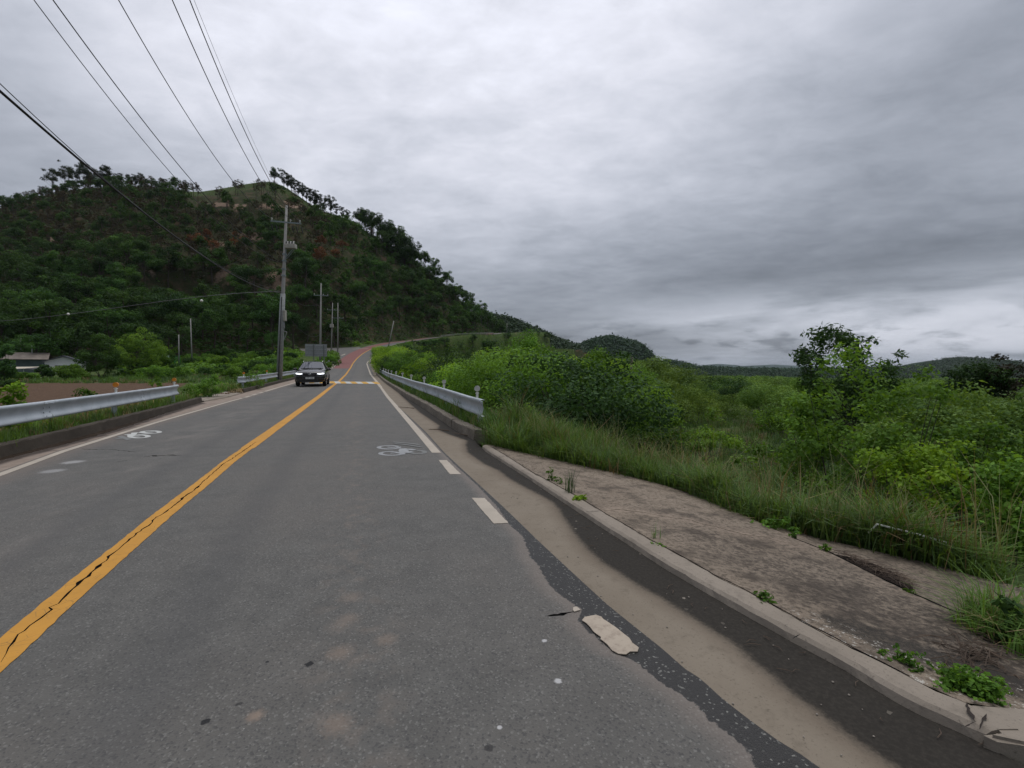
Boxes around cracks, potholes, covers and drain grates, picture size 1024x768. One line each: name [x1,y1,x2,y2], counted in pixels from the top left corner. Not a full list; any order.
crack [966,703,987,729]
crack [2,442,256,660]
